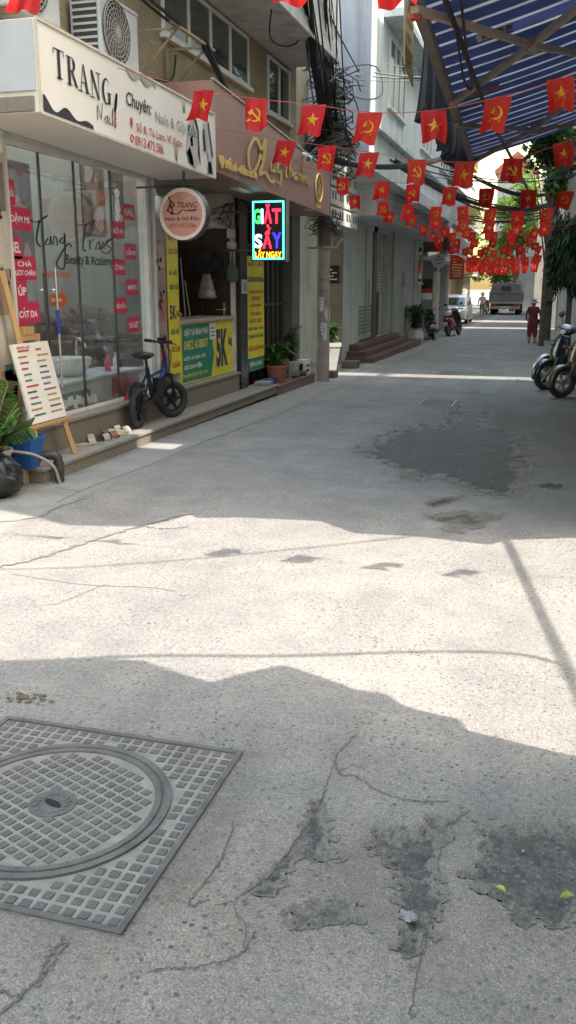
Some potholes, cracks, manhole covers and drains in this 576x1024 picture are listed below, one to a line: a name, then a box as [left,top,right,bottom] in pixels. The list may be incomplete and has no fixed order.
crack [153,732,448,971]
pothole [455,816,576,929]
manhole cover [0,715,243,936]
crack [409,810,470,1018]
drain grate [417,398,458,407]
crack [0,498,195,606]
pothole [361,813,457,967]
crack [0,937,69,1013]
pothole [279,893,368,930]
